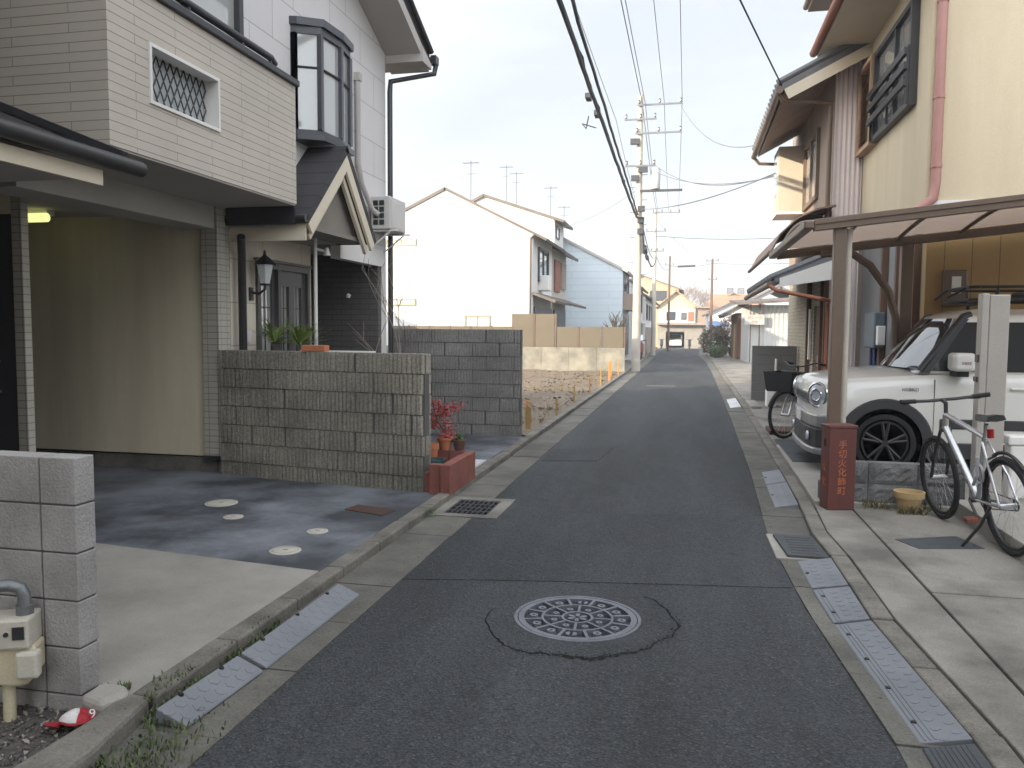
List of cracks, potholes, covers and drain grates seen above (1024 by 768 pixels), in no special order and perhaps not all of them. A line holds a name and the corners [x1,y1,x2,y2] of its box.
crack [484,596,686,662]
drain grate [430,496,516,519]
manhole cover [514,596,641,642]
